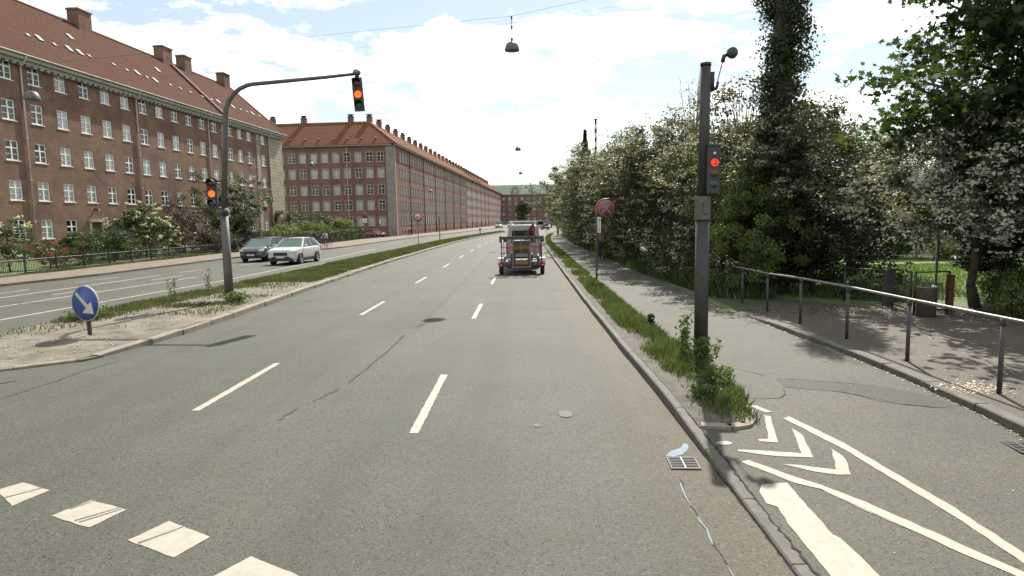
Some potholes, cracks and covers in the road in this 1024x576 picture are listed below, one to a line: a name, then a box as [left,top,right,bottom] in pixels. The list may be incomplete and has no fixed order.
drain grate [666,456,701,470]
crack [678,429,821,576]
drain grate [1000,441,1024,454]
